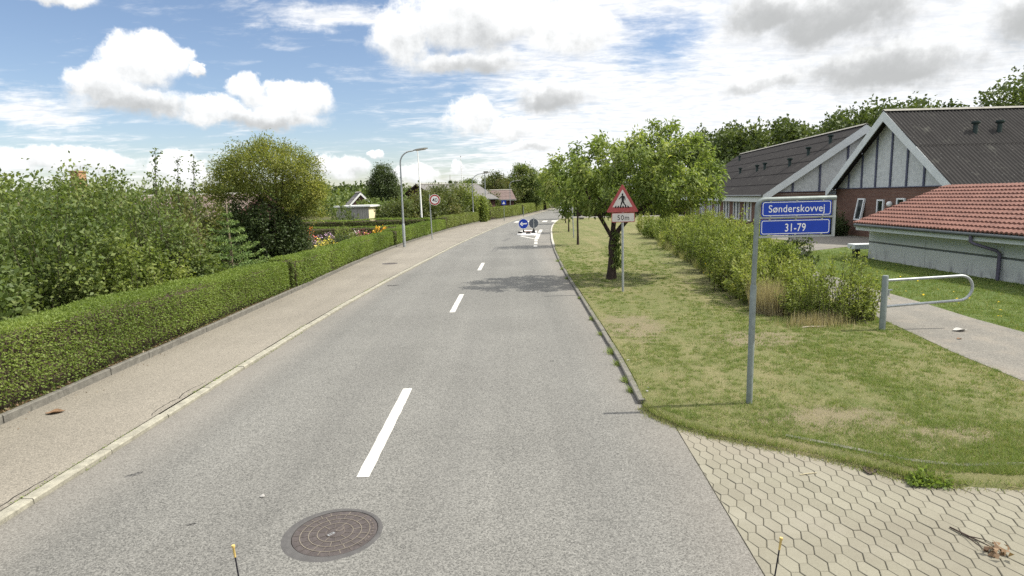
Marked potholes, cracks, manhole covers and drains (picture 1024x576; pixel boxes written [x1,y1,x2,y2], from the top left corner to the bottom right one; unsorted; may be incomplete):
manhole cover [281,508,383,562]
